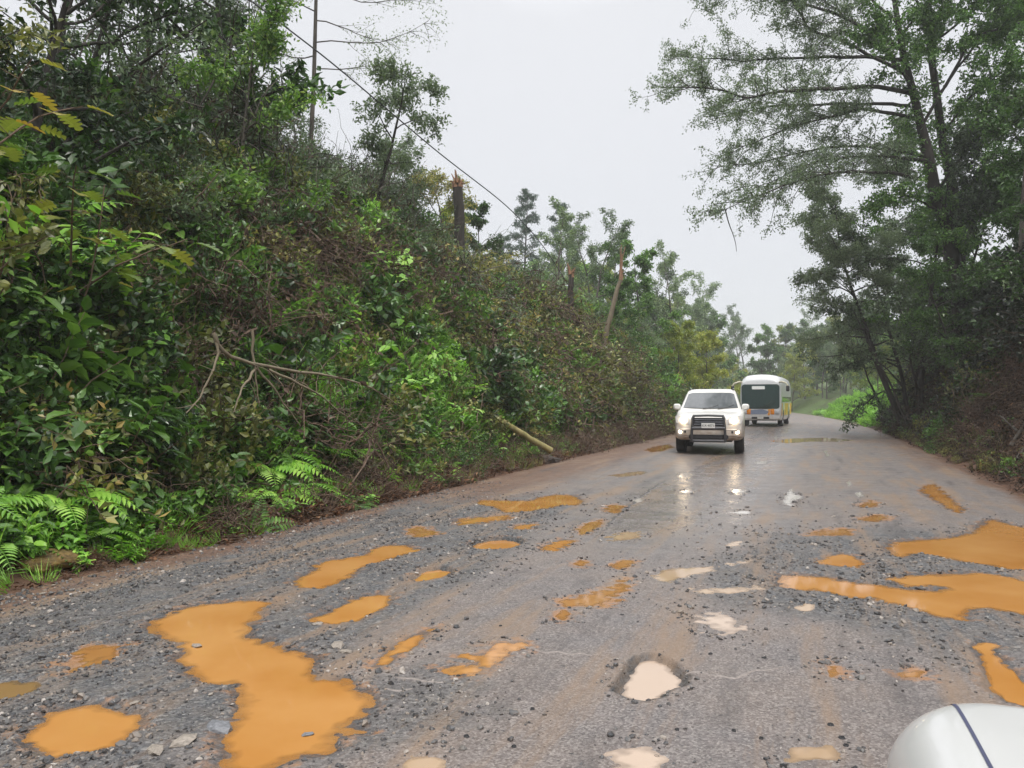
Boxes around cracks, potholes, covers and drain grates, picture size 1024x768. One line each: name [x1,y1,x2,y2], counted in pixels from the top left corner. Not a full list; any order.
crack [685,667,783,679]
pothole [430,638,541,680]
pothole [364,624,448,669]
pothole [39,641,144,676]
pothole [0,673,59,701]
pothole [467,535,528,550]
pothole [875,517,1024,571]
pothole [594,736,691,768]
pothole [688,605,756,639]
pothole [606,652,694,703]
pothole [280,542,428,589]
pothole [0,695,167,763]
